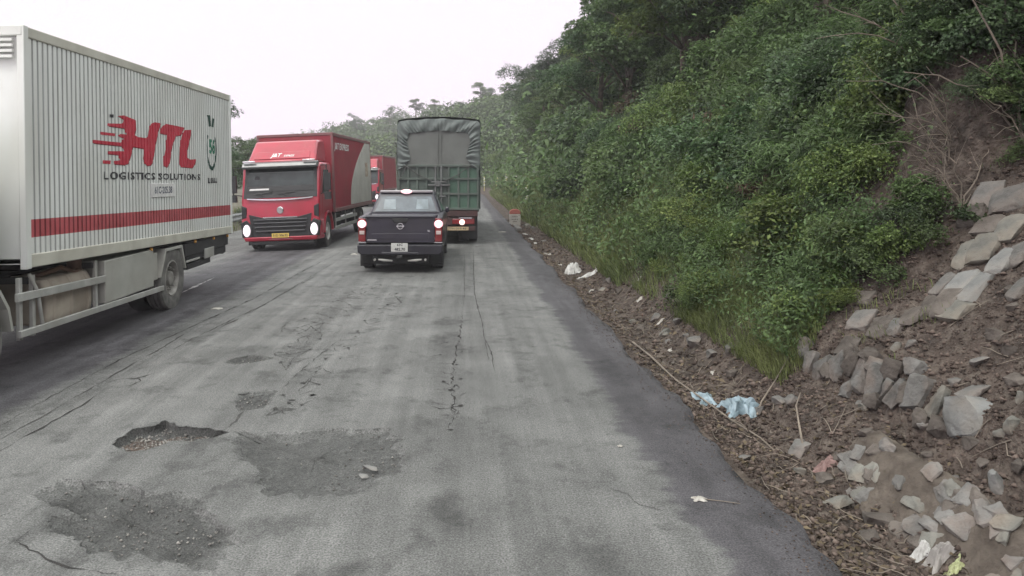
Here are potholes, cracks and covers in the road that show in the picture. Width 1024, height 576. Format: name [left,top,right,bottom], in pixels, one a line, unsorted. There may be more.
crack [431,254,494,430]
pothole [109,419,231,453]
crack [0,253,339,451]
crack [229,284,403,427]
crack [8,533,116,574]
